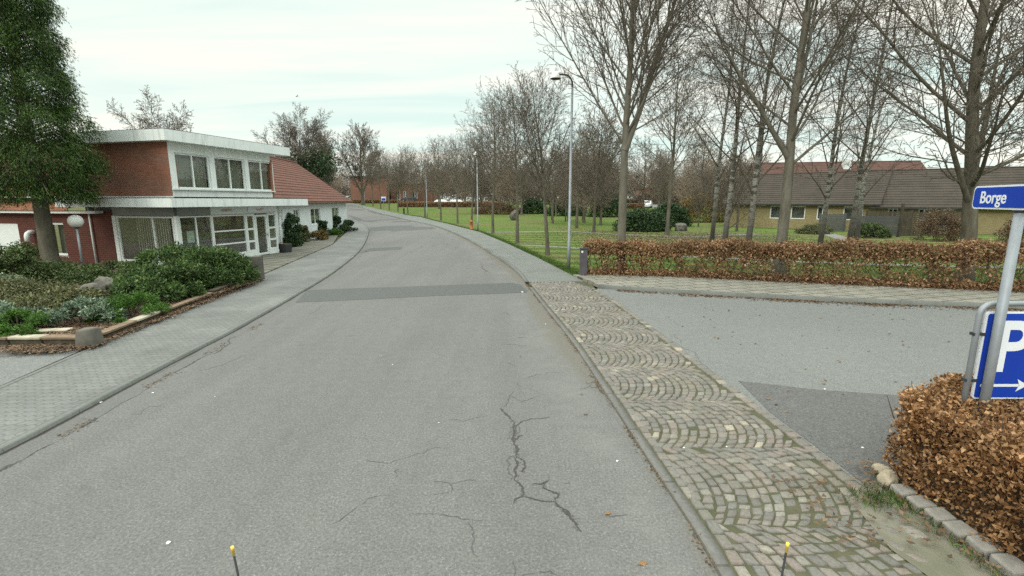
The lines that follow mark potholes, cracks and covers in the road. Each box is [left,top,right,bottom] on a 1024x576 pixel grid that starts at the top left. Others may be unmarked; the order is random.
crack [501,312,581,531]
crack [410,513,481,557]
